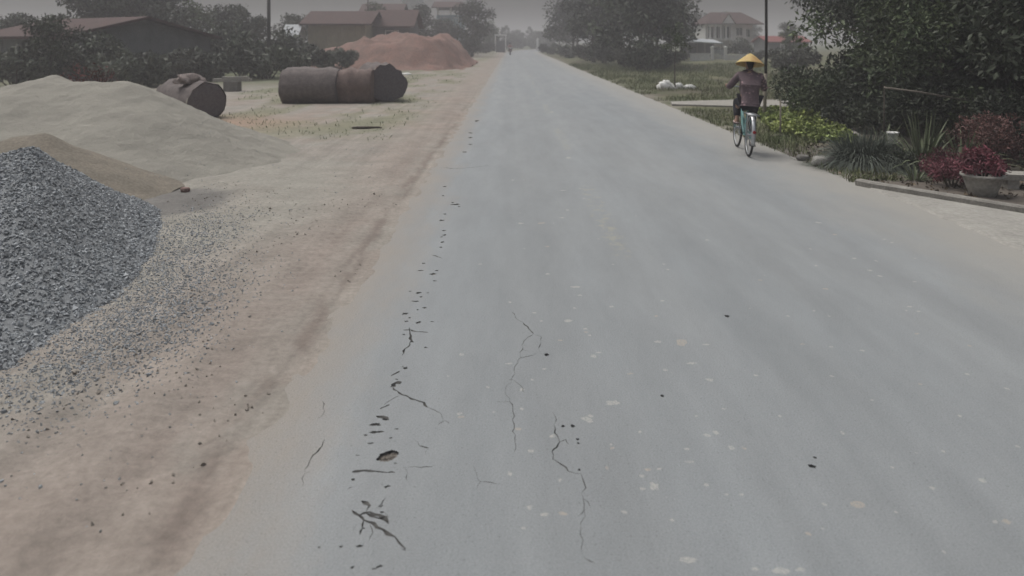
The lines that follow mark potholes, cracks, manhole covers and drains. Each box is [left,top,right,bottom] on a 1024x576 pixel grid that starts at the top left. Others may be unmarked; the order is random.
pothole [376,450,399,462]
crack [552,413,594,563]
crack [318,186,460,570]
crack [505,312,541,452]
